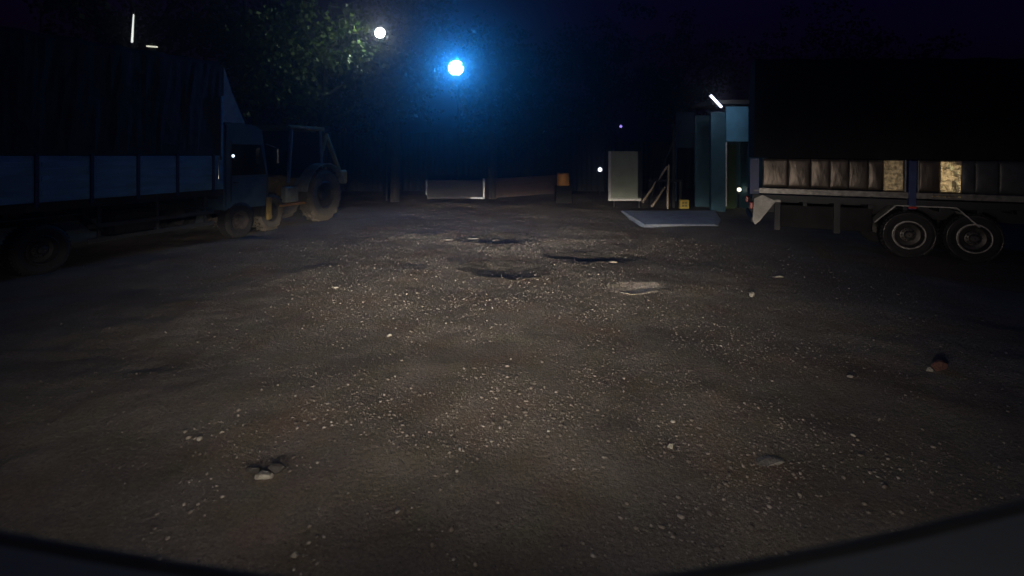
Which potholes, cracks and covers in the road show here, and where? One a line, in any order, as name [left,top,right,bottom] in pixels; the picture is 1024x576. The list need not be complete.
pothole [606,281,667,295]
pothole [540,252,646,263]
pothole [453,260,557,282]
pothole [454,232,538,244]
